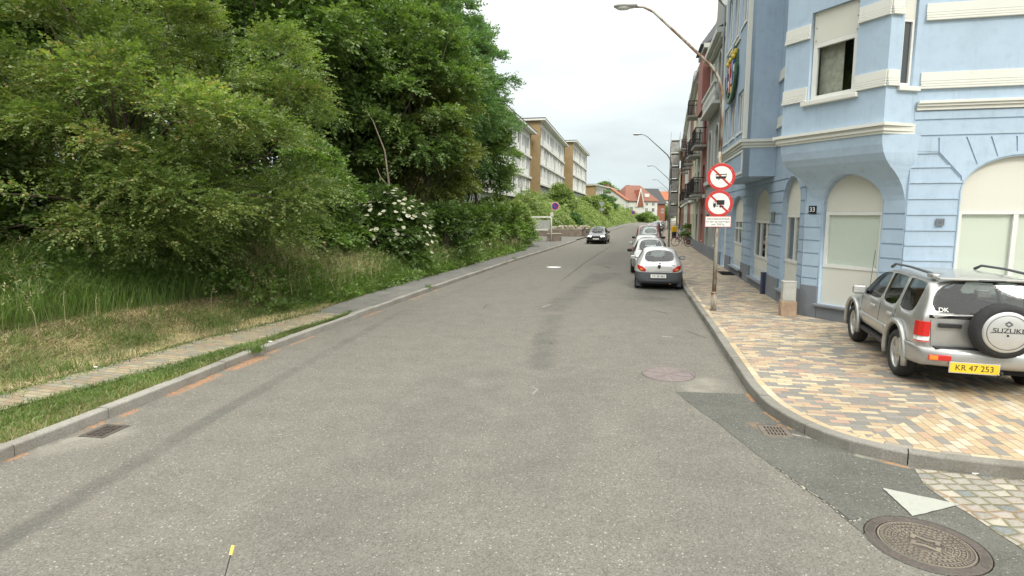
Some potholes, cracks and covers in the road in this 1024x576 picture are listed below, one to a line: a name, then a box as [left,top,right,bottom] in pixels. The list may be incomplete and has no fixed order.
manhole cover [864,516,993,576]
drain grate [78,424,130,438]
drain grate [757,424,794,437]
manhole cover [642,367,695,382]
